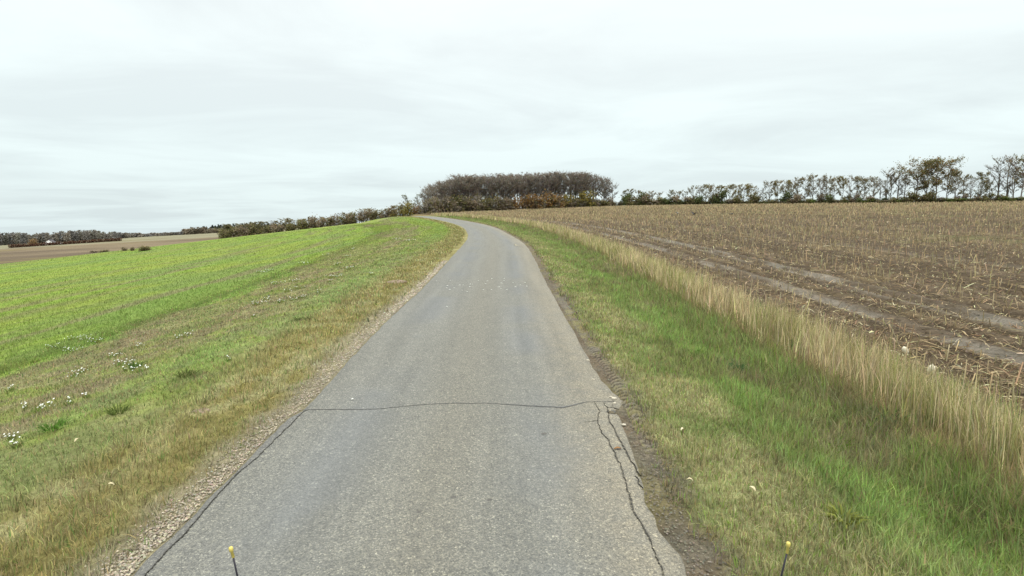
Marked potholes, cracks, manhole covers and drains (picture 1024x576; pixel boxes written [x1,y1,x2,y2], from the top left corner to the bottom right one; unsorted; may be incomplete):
crack [144,410,307,576]
crack [589,403,664,575]
